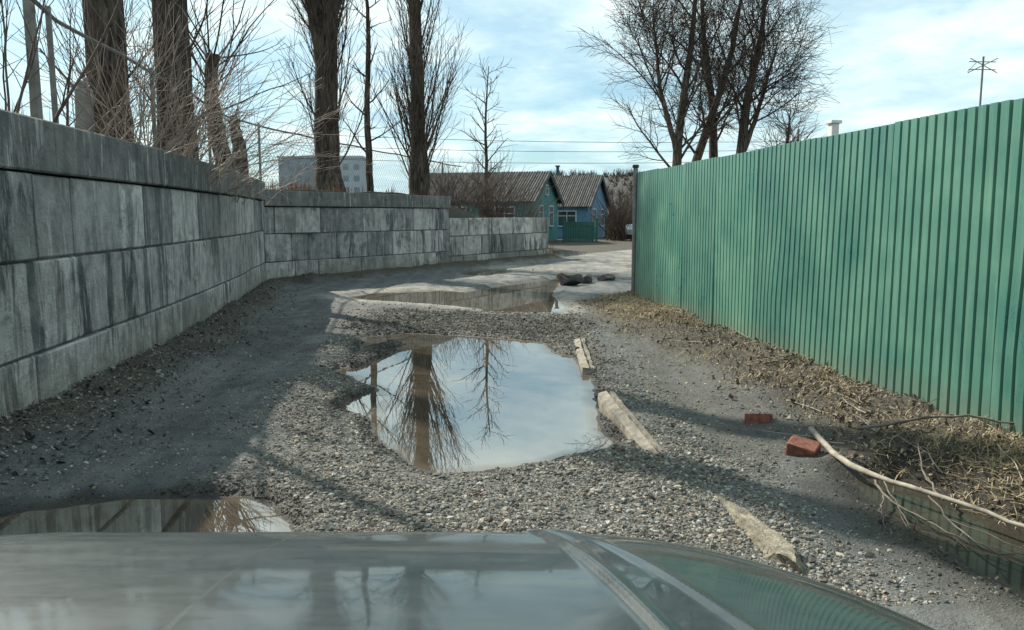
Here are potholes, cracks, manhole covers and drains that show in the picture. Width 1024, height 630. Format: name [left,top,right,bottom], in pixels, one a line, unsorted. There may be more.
pothole [0,478,323,536]
pothole [344,277,575,313]
pothole [332,328,626,476]
